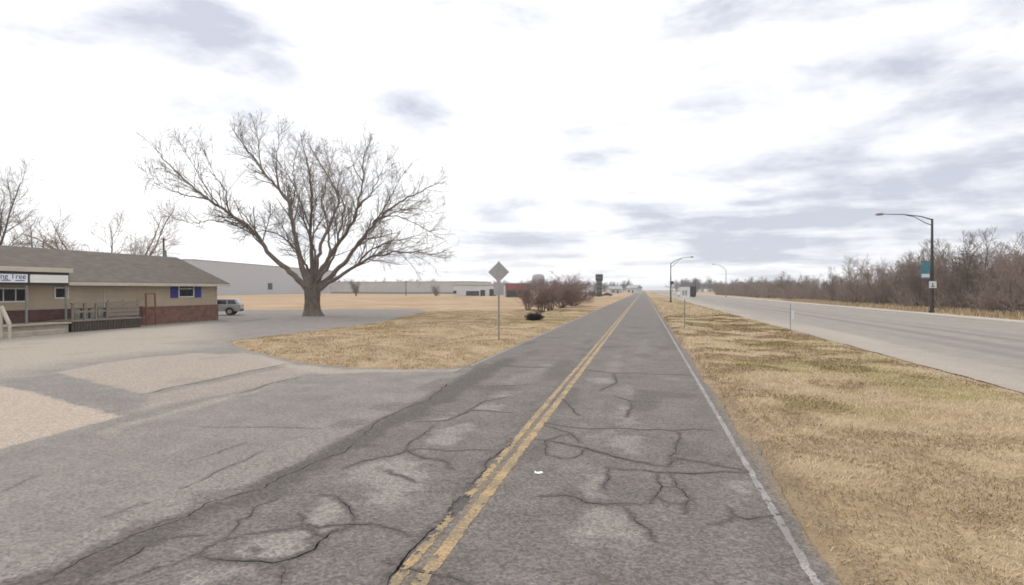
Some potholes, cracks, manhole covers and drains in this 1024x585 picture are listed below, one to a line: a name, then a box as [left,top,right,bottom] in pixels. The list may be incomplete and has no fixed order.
crack [42,385,513,585]
crack [541,370,746,543]
